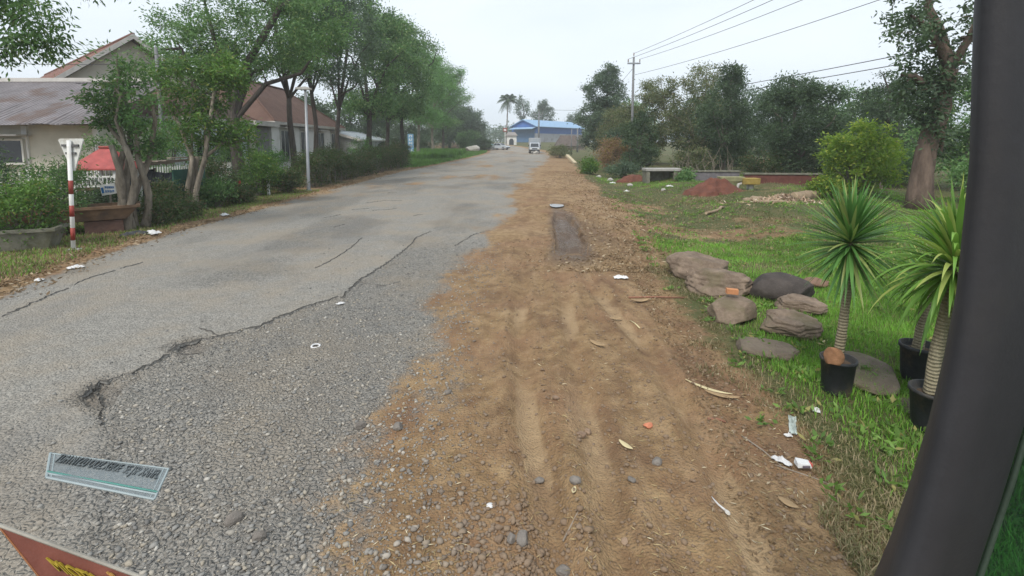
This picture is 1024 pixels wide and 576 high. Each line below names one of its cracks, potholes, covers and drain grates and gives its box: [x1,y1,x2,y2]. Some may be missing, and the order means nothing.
crack [77,176,432,426]
crack [2,262,143,317]
